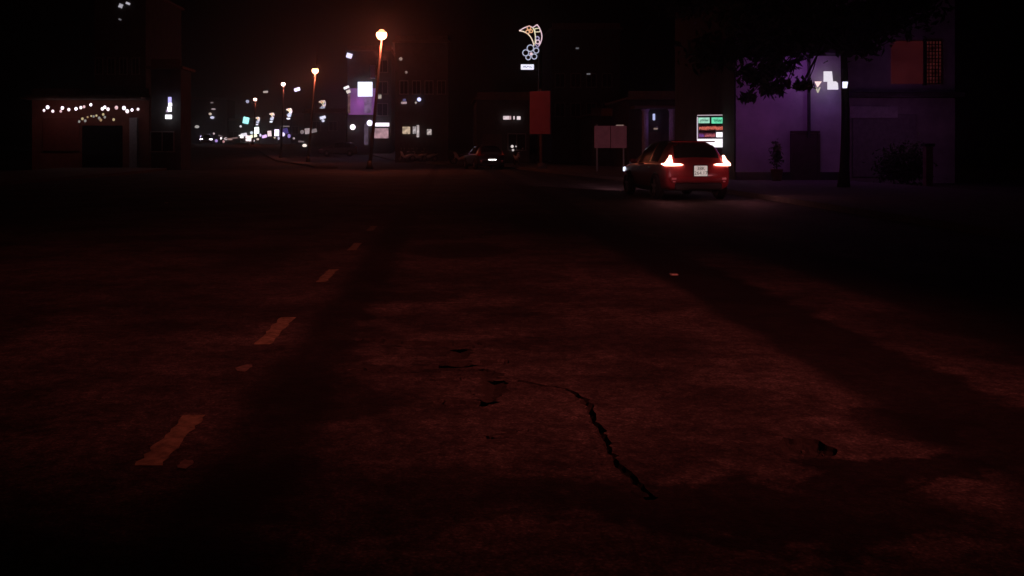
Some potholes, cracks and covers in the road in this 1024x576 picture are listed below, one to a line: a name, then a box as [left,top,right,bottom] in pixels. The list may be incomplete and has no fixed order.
crack [340,337,663,500]
pothole [764,431,852,467]
